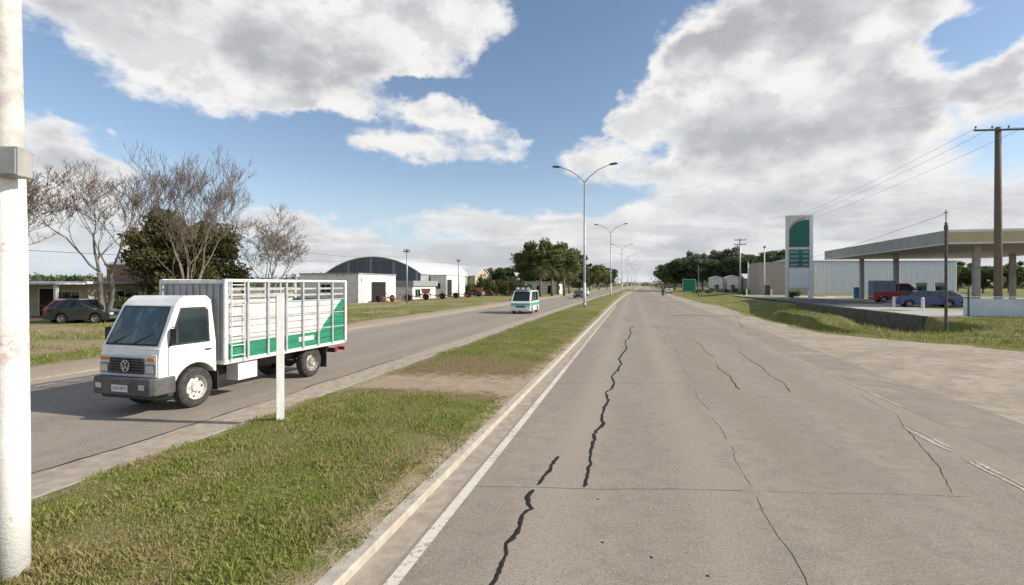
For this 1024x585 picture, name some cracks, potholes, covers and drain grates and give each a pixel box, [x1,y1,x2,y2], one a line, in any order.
crack [475,326,958,585]
